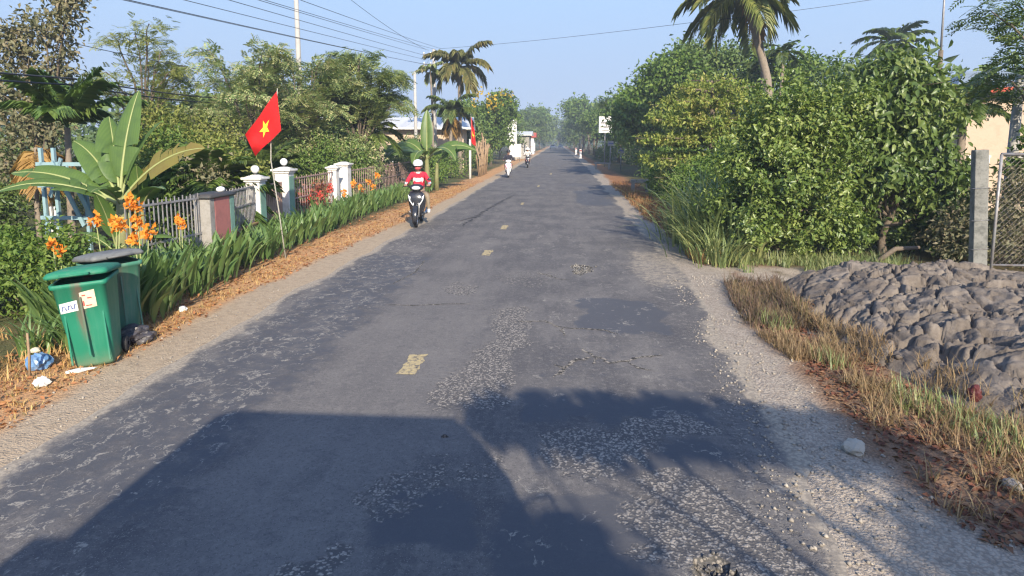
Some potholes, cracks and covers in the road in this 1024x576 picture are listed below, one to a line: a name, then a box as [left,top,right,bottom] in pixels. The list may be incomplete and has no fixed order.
pothole [571,263,597,276]
pothole [689,550,740,576]
crack [515,320,660,377]
crack [461,194,518,227]
